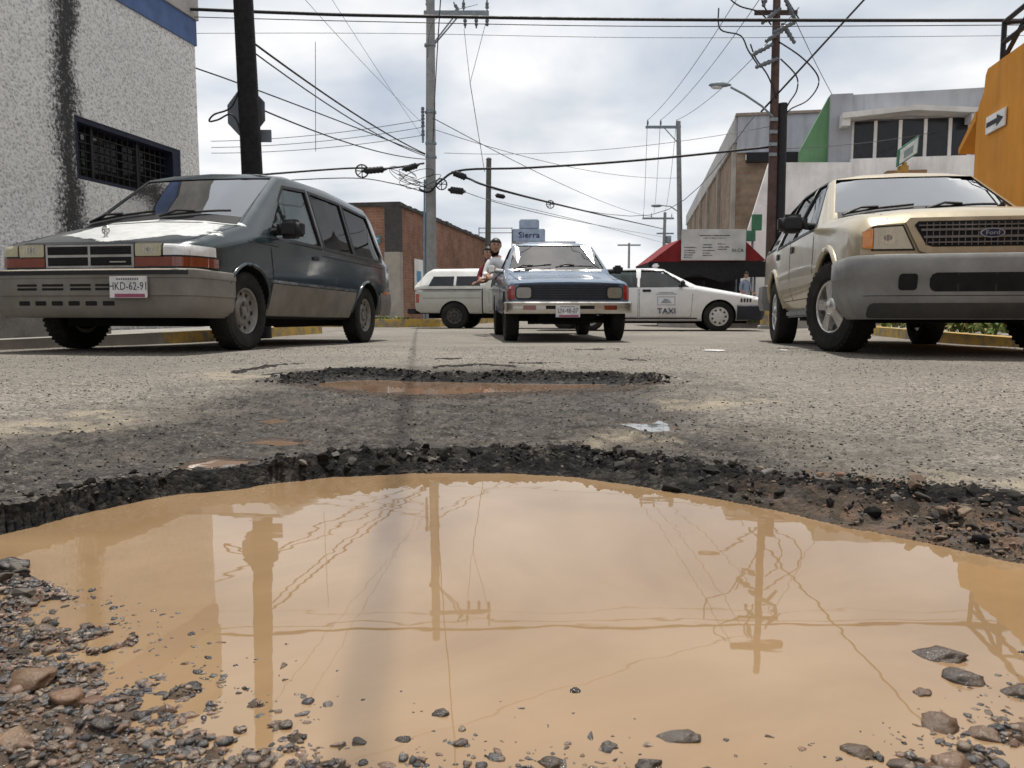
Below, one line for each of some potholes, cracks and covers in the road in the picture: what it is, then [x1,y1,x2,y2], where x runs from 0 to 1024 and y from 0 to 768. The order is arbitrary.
pothole [0,444,1024,768]
crack [231,363,345,375]
pothole [278,366,664,400]
